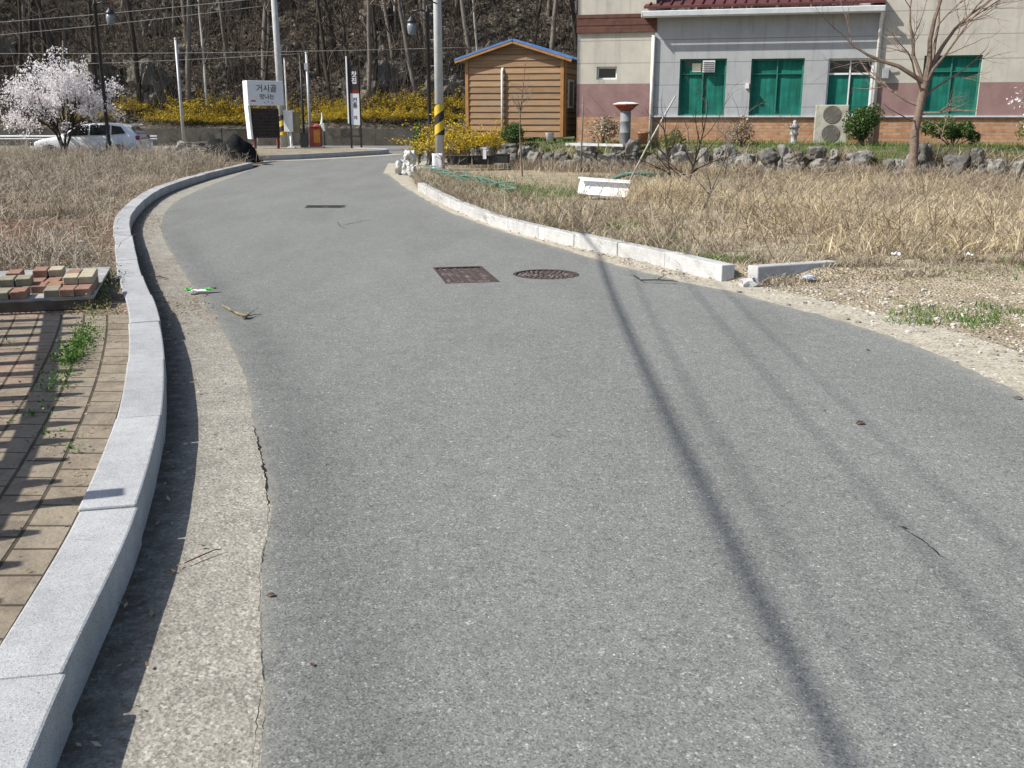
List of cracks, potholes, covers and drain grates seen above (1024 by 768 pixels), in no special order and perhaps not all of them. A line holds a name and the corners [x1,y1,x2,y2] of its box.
manhole cover [514,269,579,279]
manhole cover [433,266,500,284]
